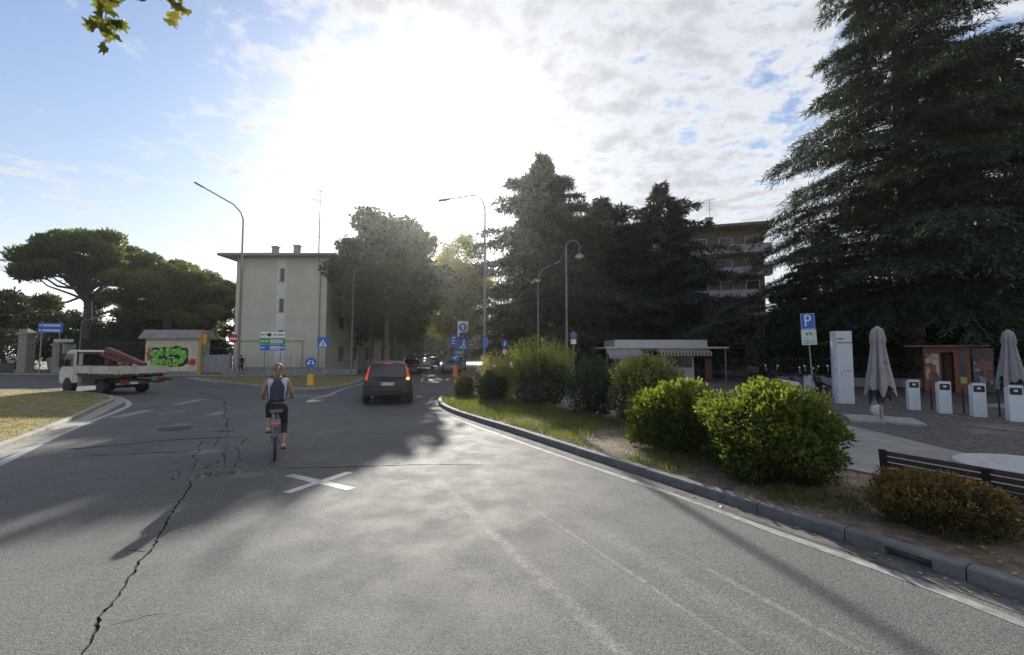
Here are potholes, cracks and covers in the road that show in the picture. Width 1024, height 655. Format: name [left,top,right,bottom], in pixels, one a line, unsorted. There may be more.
pothole [185,470,247,482]
crack [60,391,249,655]
